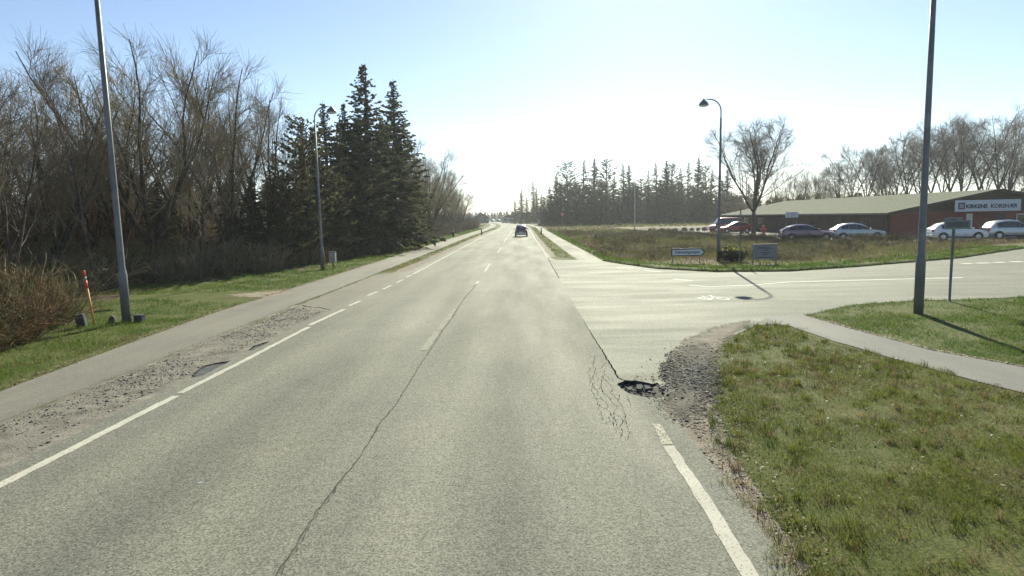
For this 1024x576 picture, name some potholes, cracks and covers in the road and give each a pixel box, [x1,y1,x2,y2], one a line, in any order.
pothole [617,380,665,397]
pothole [191,360,232,378]
crack [584,321,631,438]
crack [275,285,476,576]
